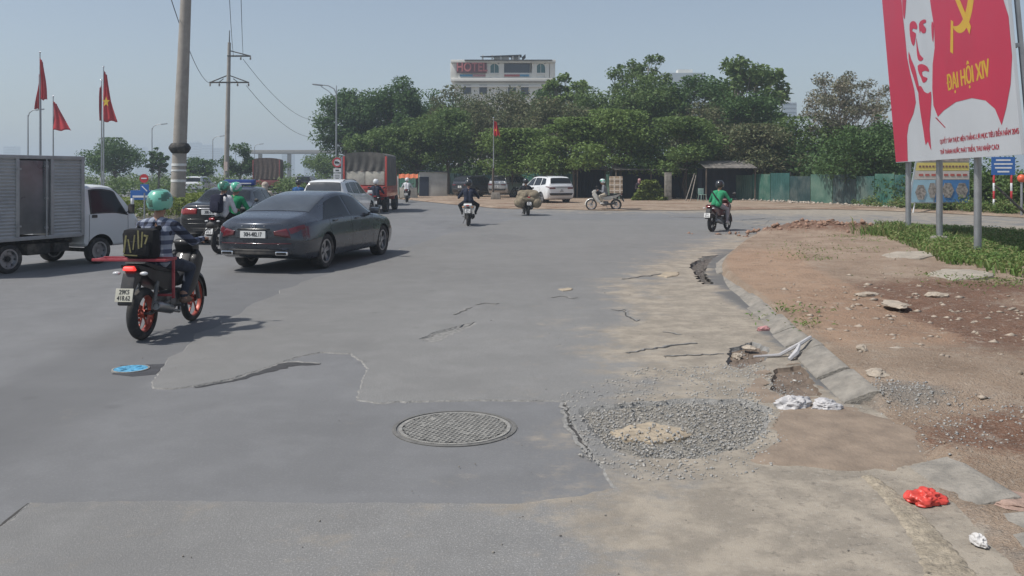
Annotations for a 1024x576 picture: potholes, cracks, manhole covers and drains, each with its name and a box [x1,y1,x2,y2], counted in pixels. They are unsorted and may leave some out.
crack [625,331,724,356]
crack [194,361,320,388]
pothole [689,255,717,284]
manhole cover [392,411,517,447]
pothole [726,341,770,369]
crack [611,309,640,321]
manhole cover [111,364,150,373]
pothole [770,365,822,397]
